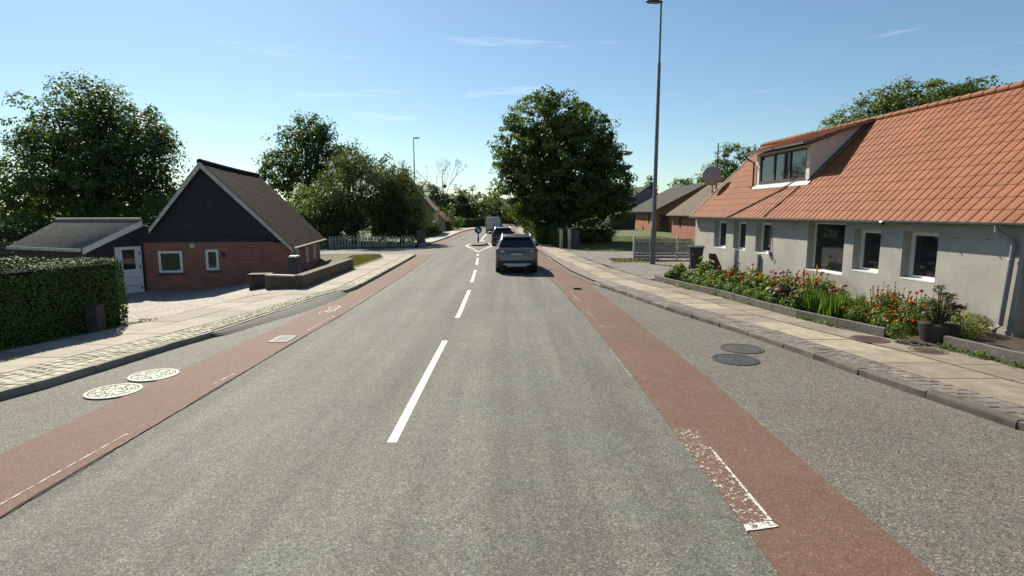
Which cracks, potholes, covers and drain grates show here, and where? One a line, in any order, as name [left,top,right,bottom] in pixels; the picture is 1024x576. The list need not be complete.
manhole cover [127,368,179,382]
manhole cover [849,335,890,344]
manhole cover [712,353,760,366]
manhole cover [83,383,143,400]
manhole cover [720,343,764,354]
manhole cover [908,346,949,355]
